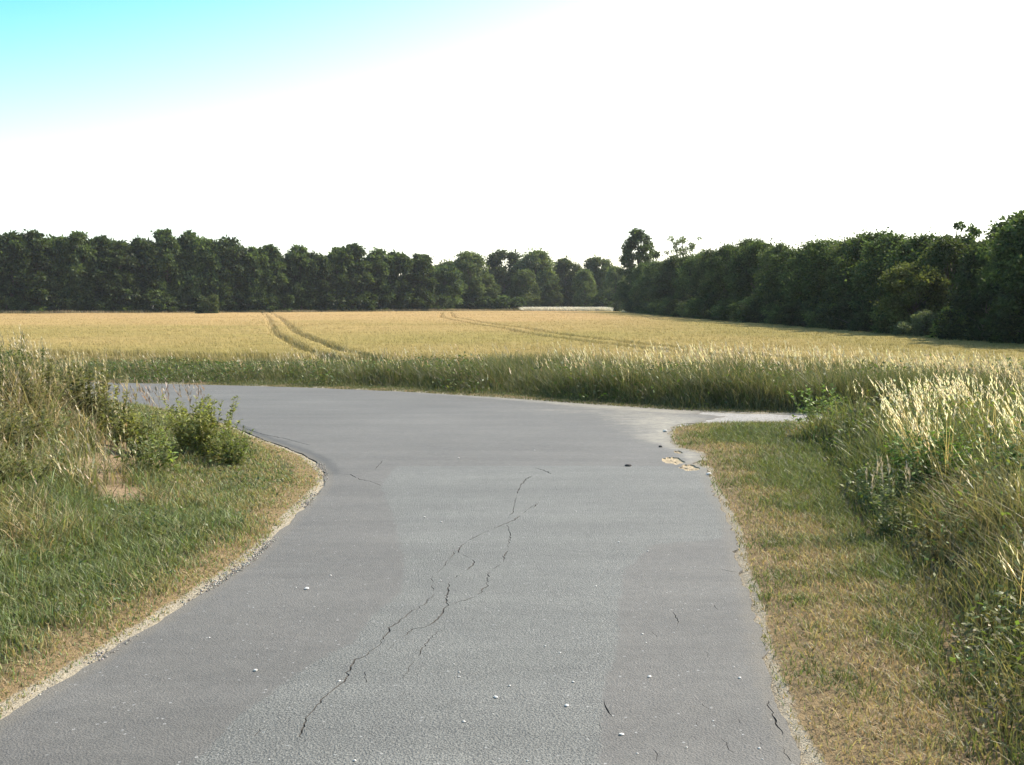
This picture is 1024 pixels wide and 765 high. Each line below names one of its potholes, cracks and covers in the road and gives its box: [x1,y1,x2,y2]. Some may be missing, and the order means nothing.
crack [766,700,791,761]
crack [254,468,551,739]
pothole [662,457,685,465]
